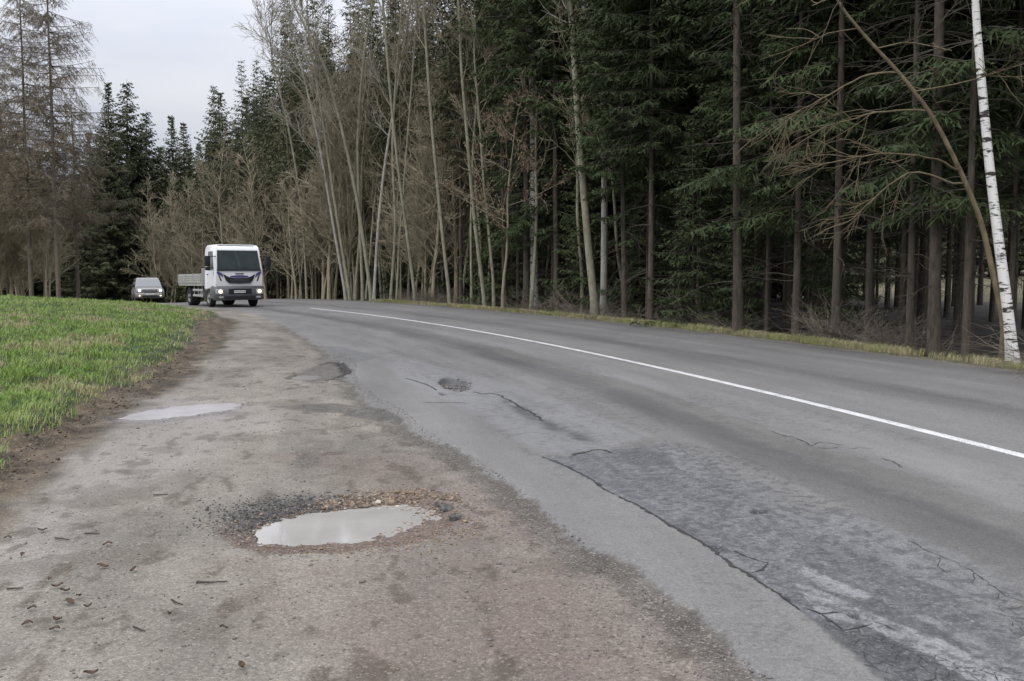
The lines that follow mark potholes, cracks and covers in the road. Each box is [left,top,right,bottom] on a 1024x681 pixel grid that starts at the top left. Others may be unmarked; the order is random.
pothole [286,362,352,383]
pothole [438,377,472,392]
crack [908,540,1024,638]
crack [674,525,768,573]
pothole [110,403,243,425]
crack [803,608,1024,681]
pothole [215,493,460,554]
crack [477,392,542,421]
